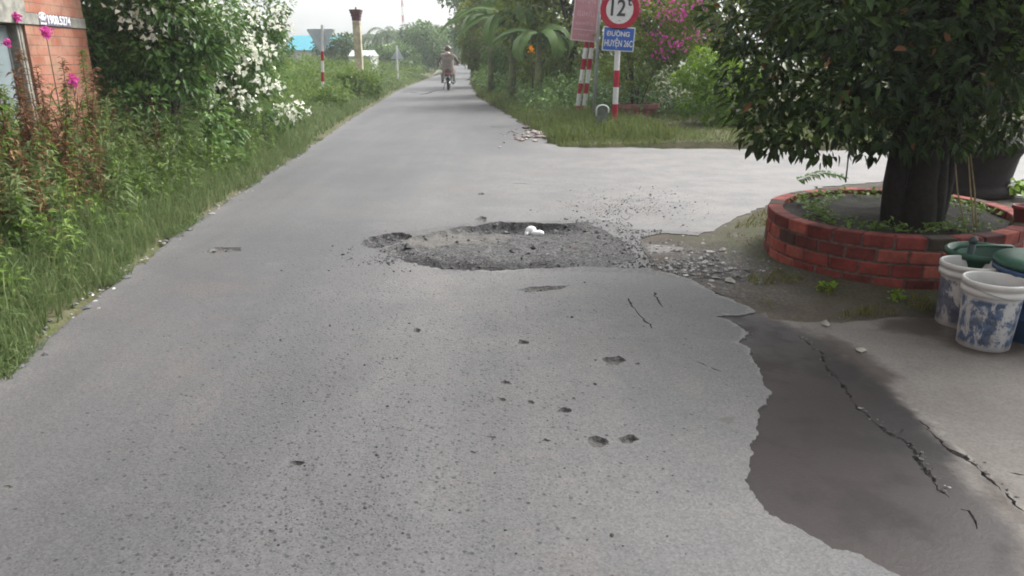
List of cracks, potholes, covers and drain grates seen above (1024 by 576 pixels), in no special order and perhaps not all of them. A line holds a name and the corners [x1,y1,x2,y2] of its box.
pothole [602,356,626,365]
pothole [588,436,609,448]
crack [628,292,663,328]
crack [799,337,1023,511]
pothole [360,233,412,248]
pothole [382,221,636,271]
pothole [618,435,639,443]
